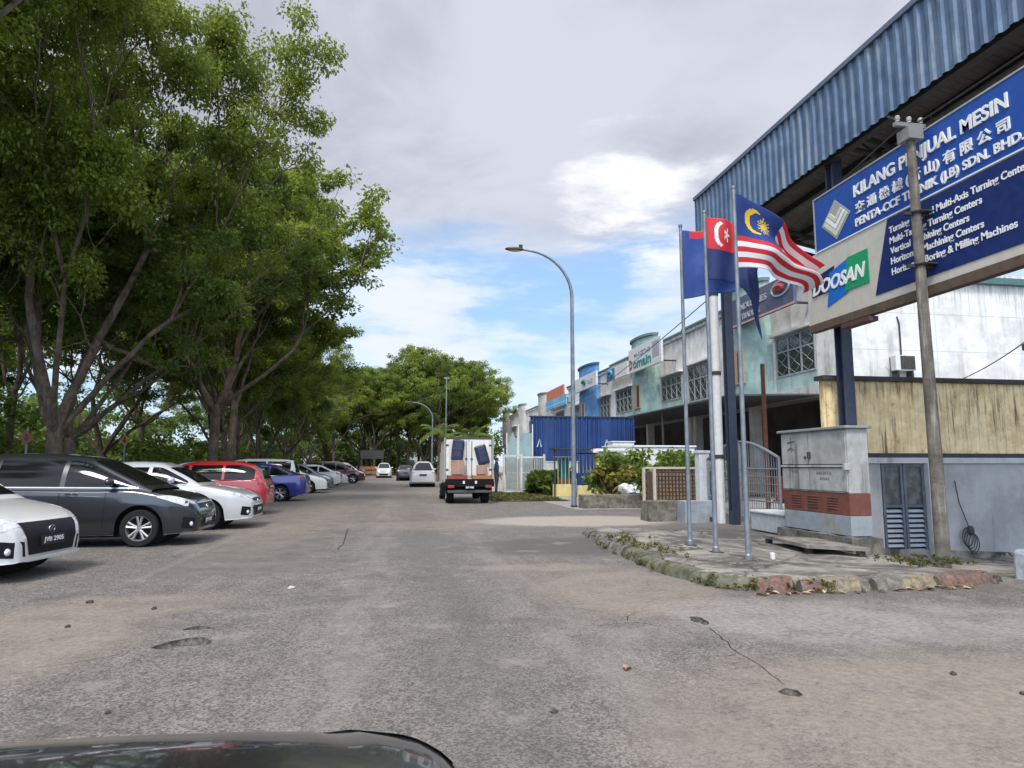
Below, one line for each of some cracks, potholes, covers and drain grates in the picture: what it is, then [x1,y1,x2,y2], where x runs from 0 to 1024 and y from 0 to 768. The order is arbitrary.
pothole [778,688,803,697]
pothole [151,637,212,649]
